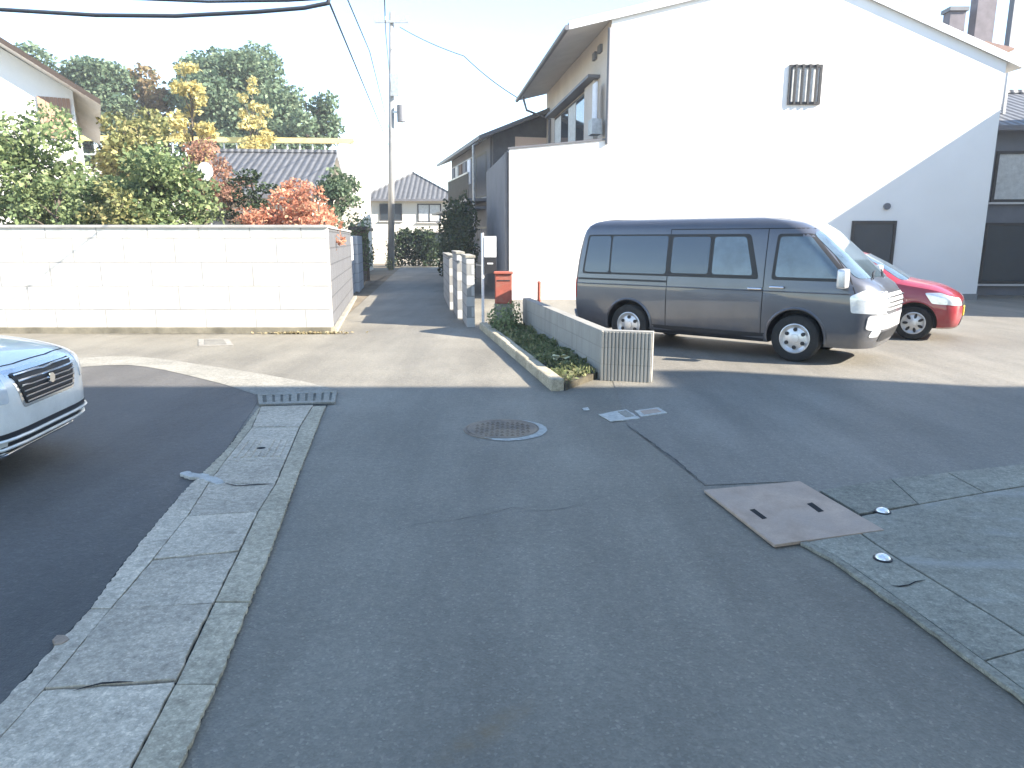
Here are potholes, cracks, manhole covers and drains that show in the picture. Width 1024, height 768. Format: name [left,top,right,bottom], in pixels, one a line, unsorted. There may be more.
crack [73,681,134,691]
utility cover [599,409,640,422]
manhole cover [464,419,547,441]
crack [386,495,610,535]
drain grate [258,390,338,406]
utility cover [635,407,667,417]
